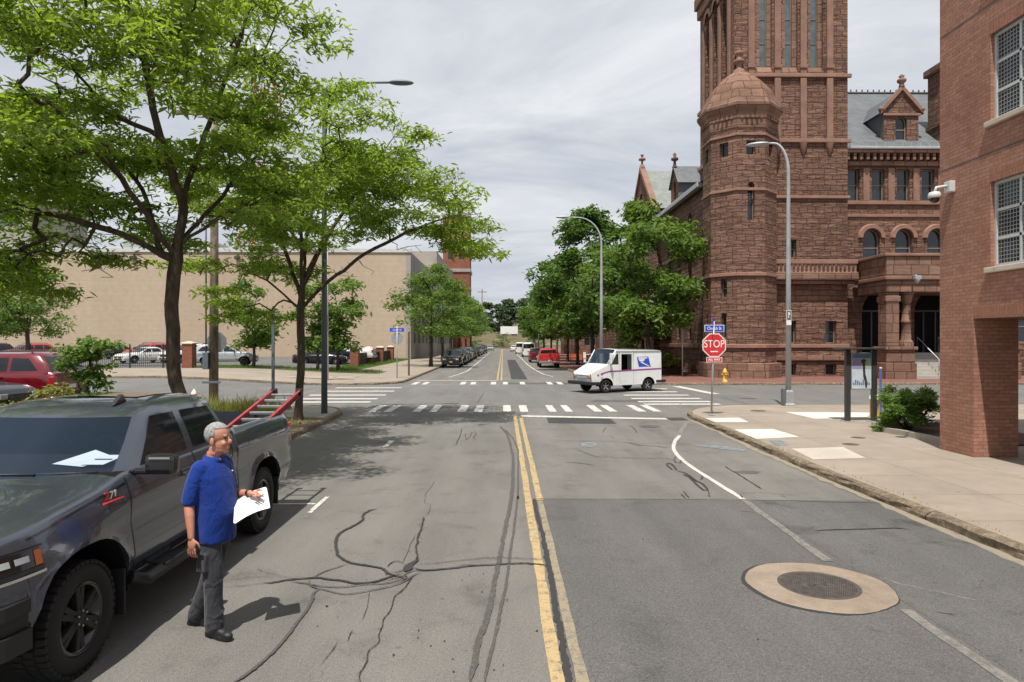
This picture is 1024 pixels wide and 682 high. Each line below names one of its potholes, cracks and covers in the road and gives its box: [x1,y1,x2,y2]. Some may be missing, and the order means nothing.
crack [310,592,370,677]
crack [387,482,535,584]
manhole cover [741,562,900,615]
